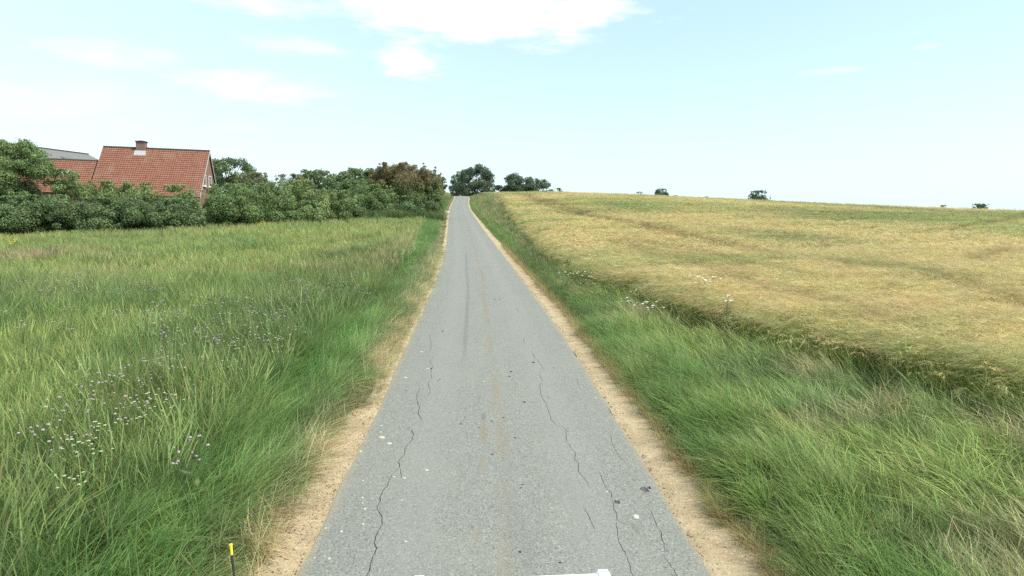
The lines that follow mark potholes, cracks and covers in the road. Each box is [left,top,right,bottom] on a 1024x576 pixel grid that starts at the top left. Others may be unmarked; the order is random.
crack [523,339,633,575]
crack [353,344,434,576]
